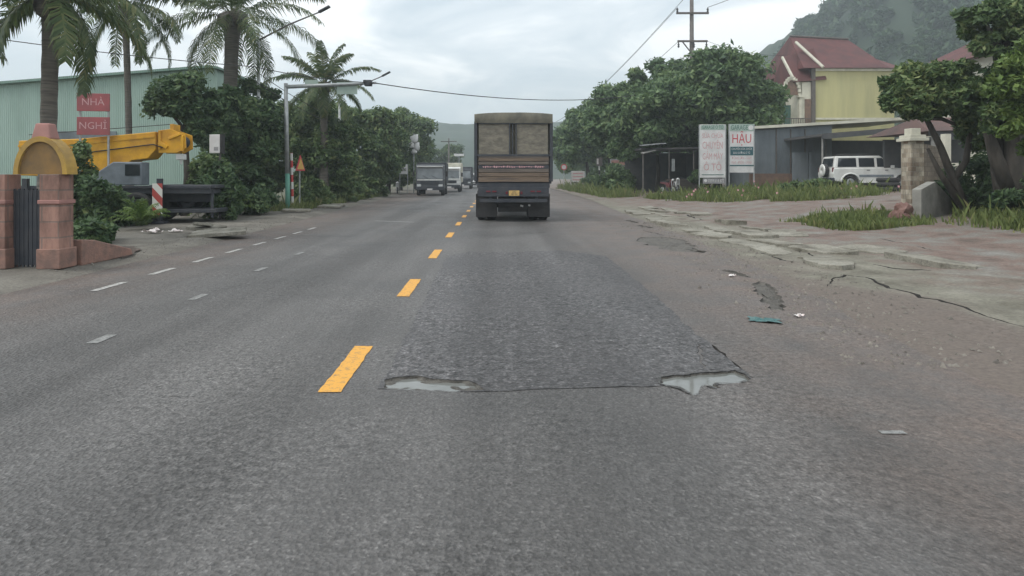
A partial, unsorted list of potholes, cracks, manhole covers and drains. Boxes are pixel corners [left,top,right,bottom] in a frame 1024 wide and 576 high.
pothole [384,376,483,392]
pothole [636,237,707,253]
pothole [657,369,750,395]
crack [827,264,1023,327]
pothole [751,281,786,310]
